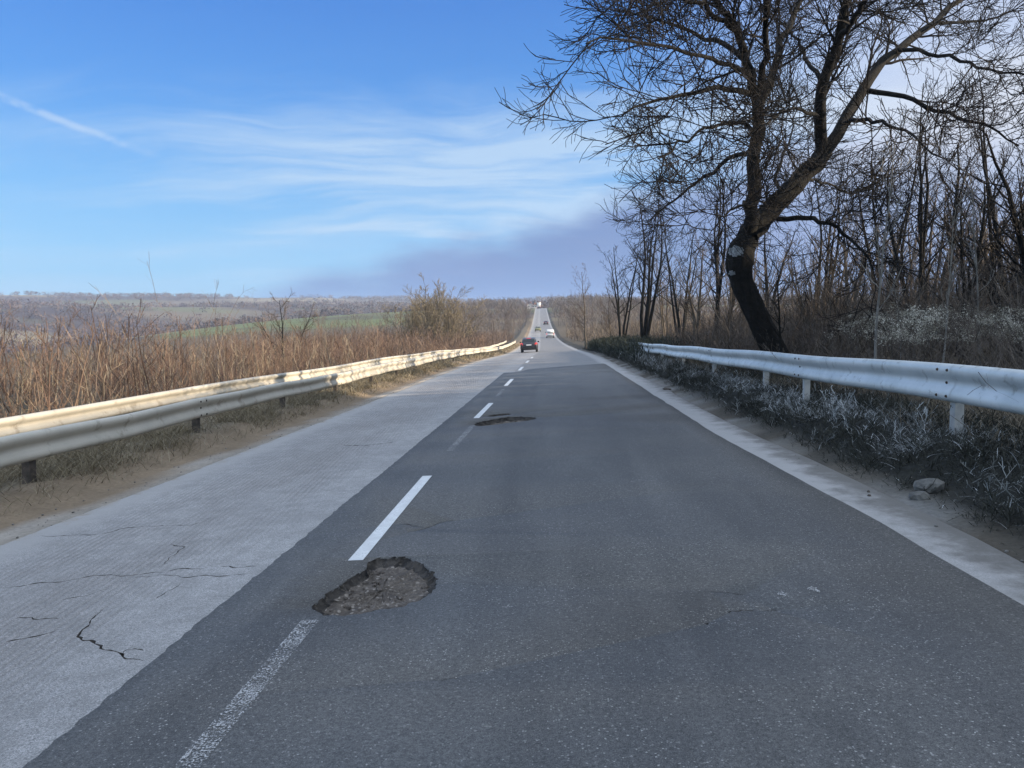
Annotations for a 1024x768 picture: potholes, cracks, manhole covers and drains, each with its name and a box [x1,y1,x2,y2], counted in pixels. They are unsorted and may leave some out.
pothole [312,556,438,616]
crack [9,544,253,661]
pothole [475,416,536,426]
